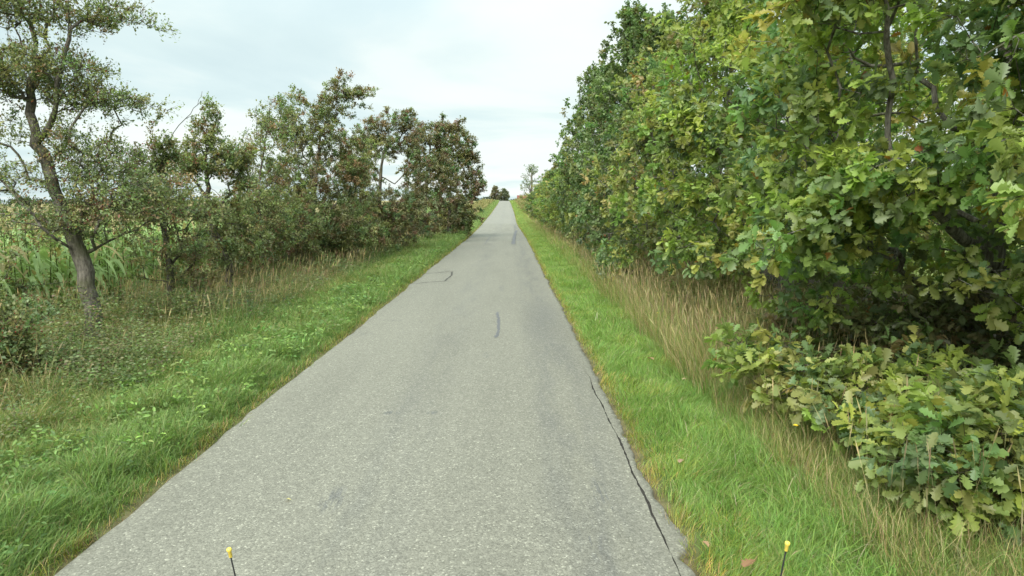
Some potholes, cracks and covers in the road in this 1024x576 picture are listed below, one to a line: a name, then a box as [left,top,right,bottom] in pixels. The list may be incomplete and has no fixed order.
crack [587,374,681,576]
